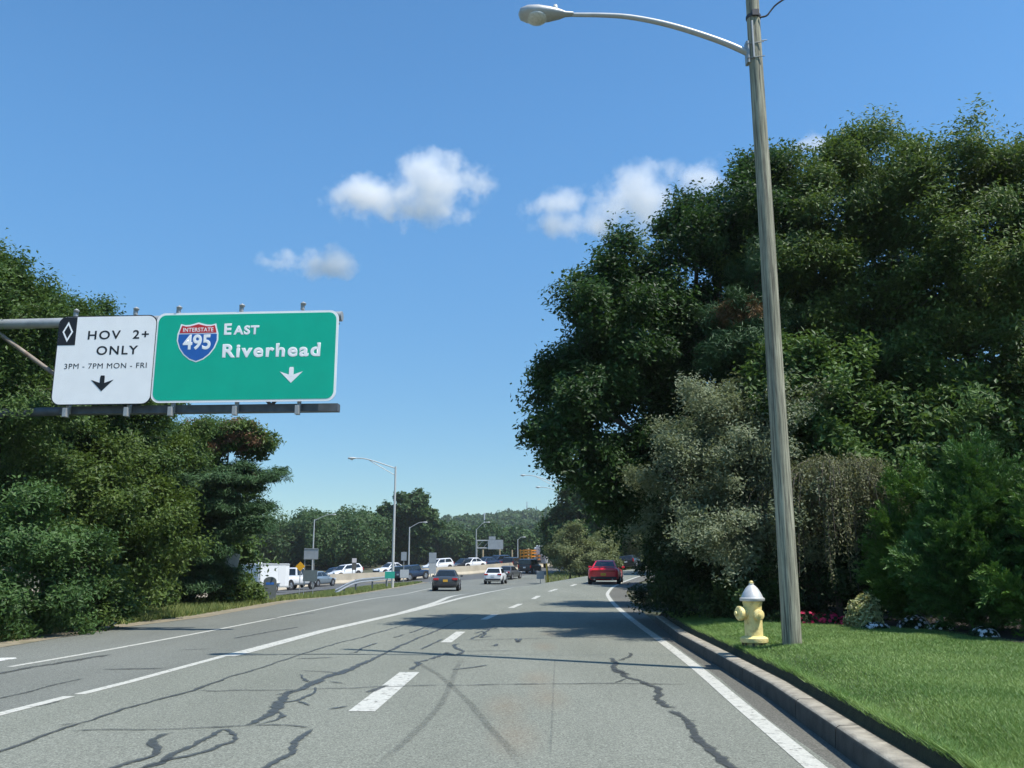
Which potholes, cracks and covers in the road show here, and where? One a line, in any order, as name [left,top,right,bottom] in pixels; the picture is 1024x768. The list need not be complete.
crack [68,622,659,768]
